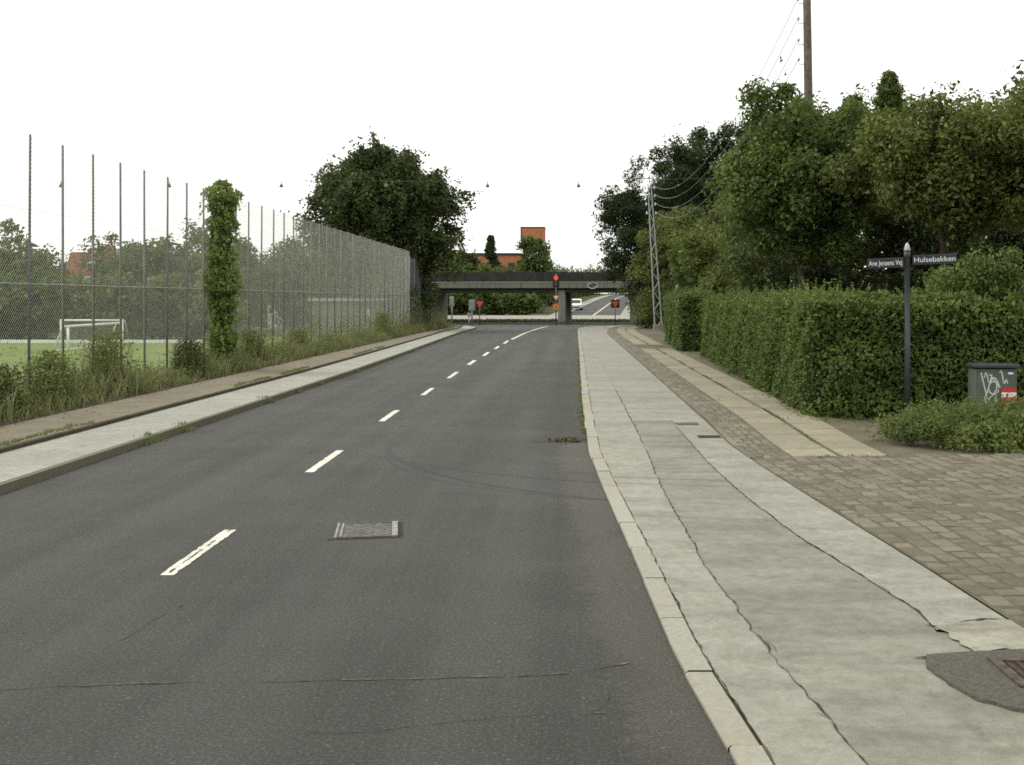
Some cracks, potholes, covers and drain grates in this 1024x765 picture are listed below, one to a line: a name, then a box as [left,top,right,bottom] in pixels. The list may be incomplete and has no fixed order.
crack [7,662,629,690]
crack [617,393,868,765]
crack [682,433,998,626]
drain grate [987,657,1024,688]
